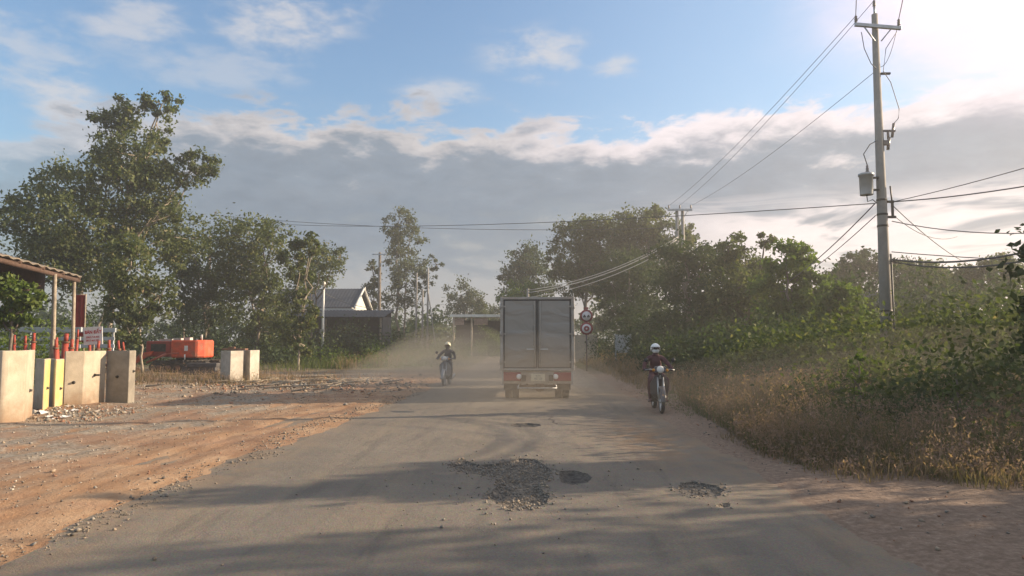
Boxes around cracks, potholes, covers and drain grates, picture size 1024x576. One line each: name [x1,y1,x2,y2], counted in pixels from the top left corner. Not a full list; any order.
pothole [559,470,592,485]
pothole [677,482,725,497]
pothole [447,458,552,509]
